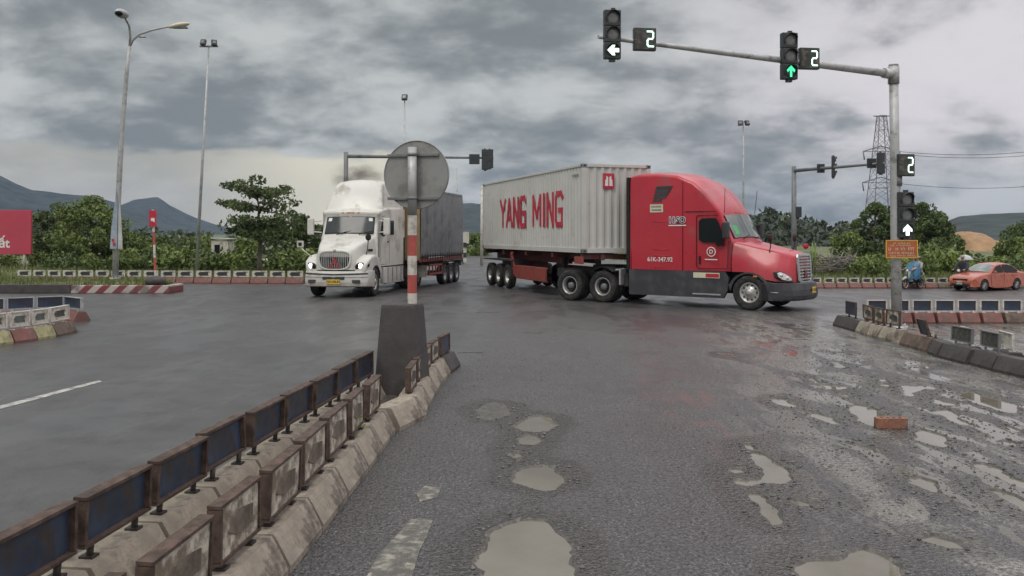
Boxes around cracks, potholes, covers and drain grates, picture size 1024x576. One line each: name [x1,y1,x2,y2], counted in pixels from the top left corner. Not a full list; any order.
pothole [847,403,887,426]
pothole [727,466,748,474]
pothole [733,441,793,488]
pothole [969,461,1024,488]
pothole [808,411,842,425]
pothole [790,546,907,576]
pothole [912,428,952,447]
pothole [907,475,951,501]
pothole [896,381,940,397]
pothole [957,390,1020,414]
pothole [516,433,543,445]
pothole [769,396,802,408]
